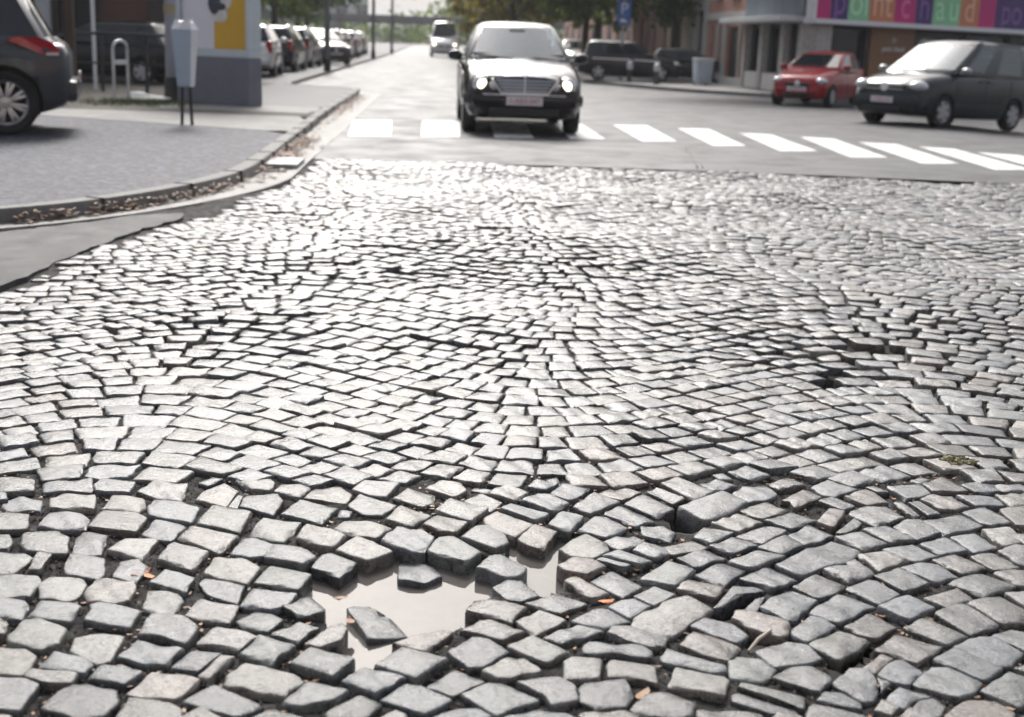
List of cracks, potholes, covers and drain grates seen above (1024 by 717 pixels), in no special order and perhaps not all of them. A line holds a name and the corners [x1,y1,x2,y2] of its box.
pothole [306,553,494,672]
pothole [506,538,572,597]
